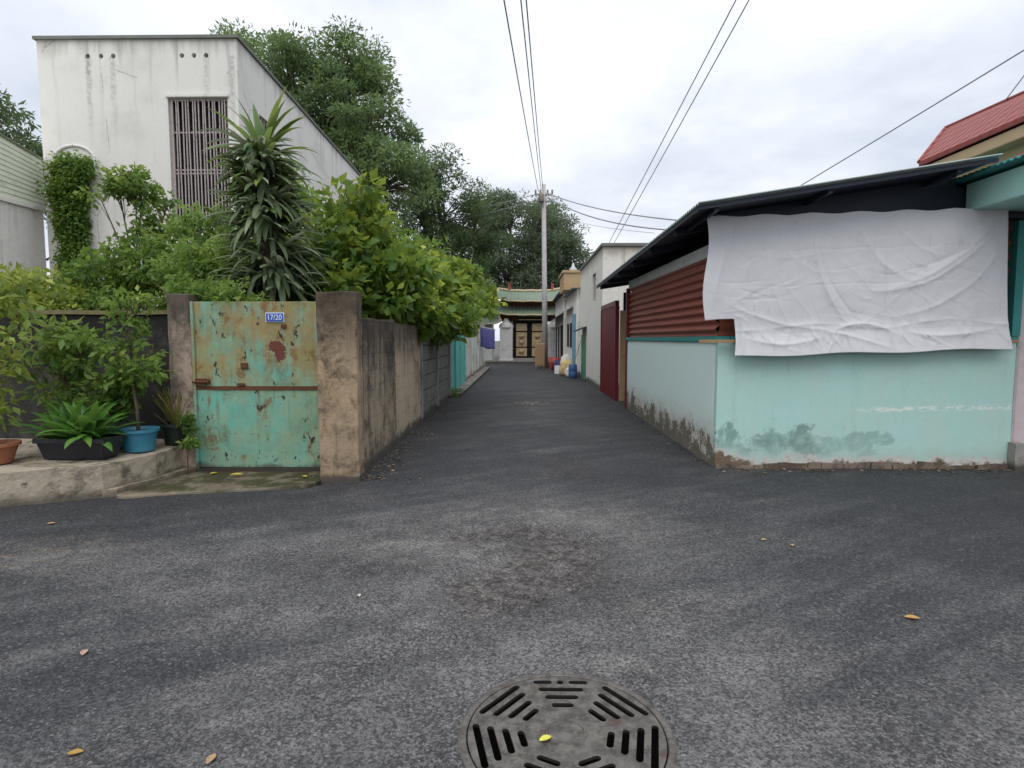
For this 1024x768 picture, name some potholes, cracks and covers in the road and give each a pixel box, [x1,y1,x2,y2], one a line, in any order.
manhole cover [458,673,677,768]
